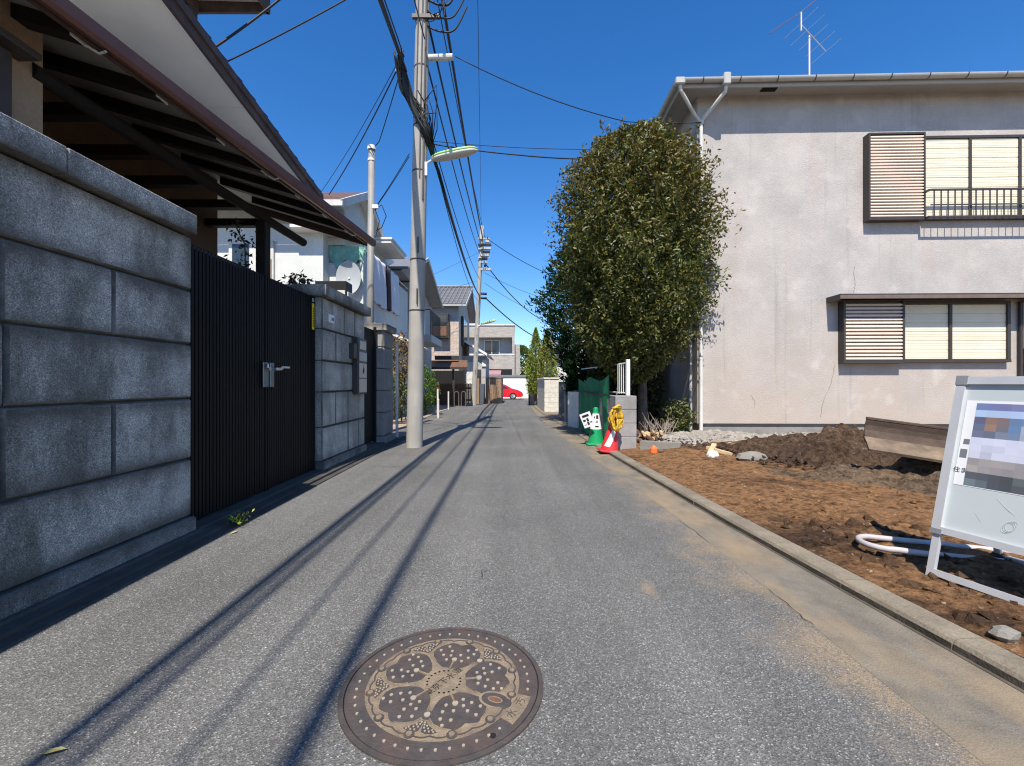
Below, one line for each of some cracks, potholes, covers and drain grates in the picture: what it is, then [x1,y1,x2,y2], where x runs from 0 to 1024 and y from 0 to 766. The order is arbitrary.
manhole cover [337,627,544,766]
